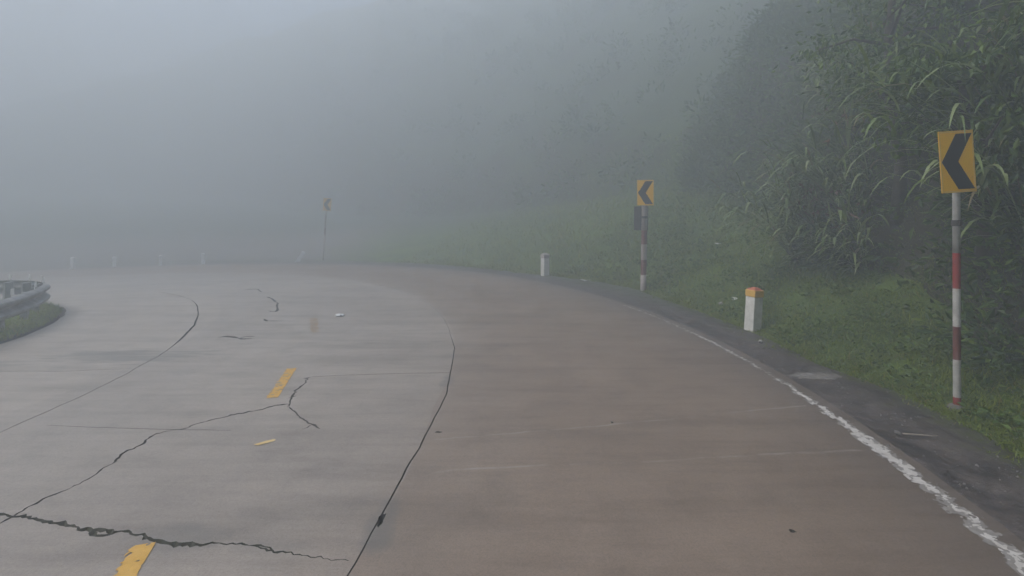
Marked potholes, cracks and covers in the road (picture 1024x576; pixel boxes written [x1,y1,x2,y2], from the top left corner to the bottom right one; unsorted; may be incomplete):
crack [222,289,284,339]
crack [0,378,349,561]
